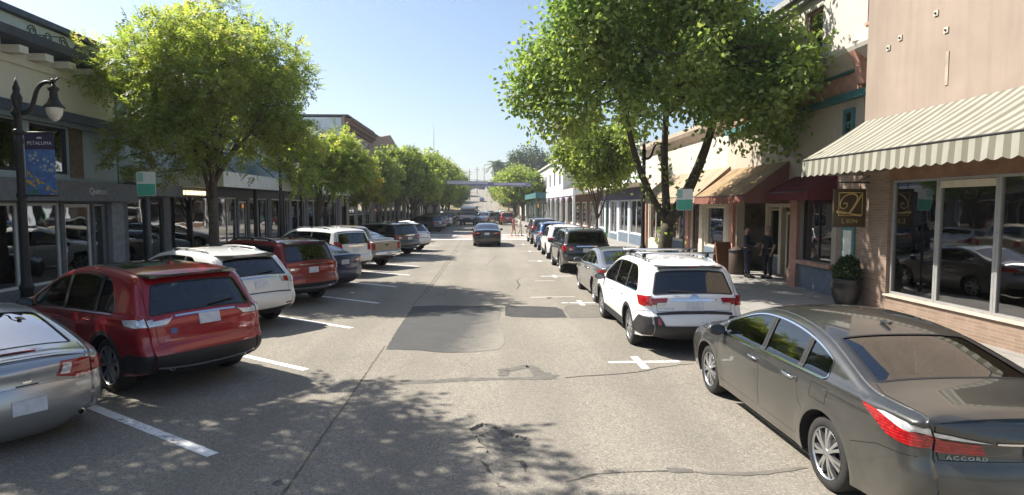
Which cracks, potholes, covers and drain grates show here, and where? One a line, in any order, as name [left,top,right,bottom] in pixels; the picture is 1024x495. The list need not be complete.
crack [566,467,807,482]
pothole [469,423,532,456]
